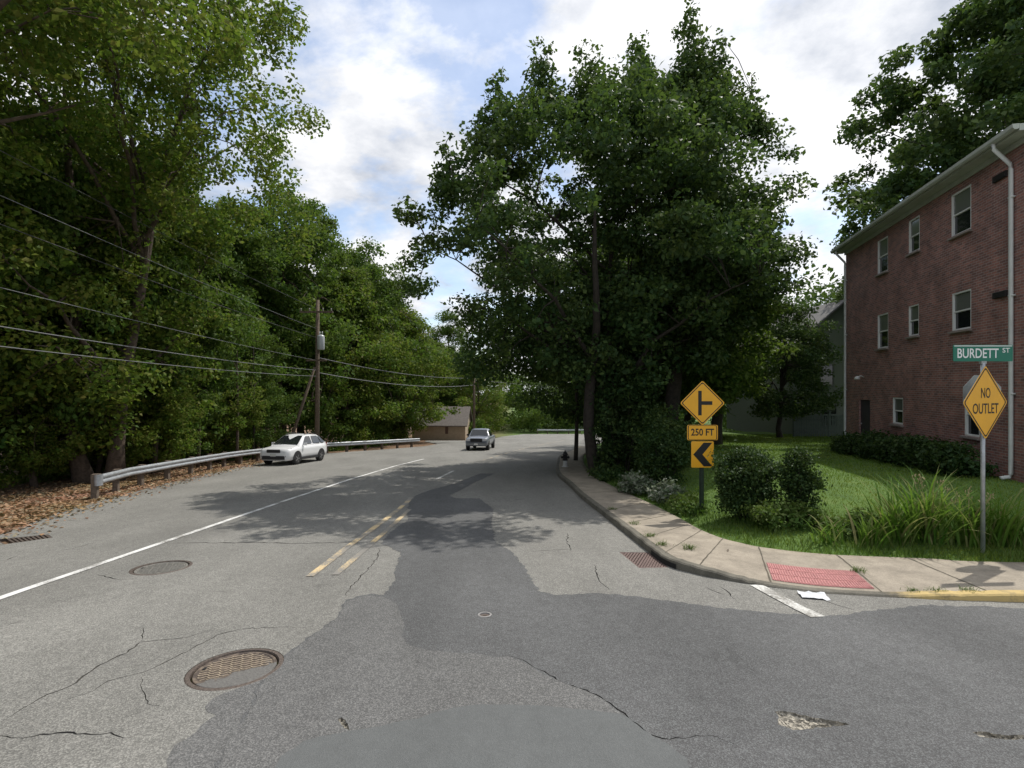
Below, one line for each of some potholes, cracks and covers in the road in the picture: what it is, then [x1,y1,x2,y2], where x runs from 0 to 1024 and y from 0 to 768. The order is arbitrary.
drain grate [0,534,53,544]
manhole cover [184,648,284,691]
crack [13,627,305,715]
pothole [973,731,1024,740]
crack [500,656,731,743]
manhole cover [129,560,193,575]
pothole [775,711,849,730]
drain grate [620,552,668,568]
